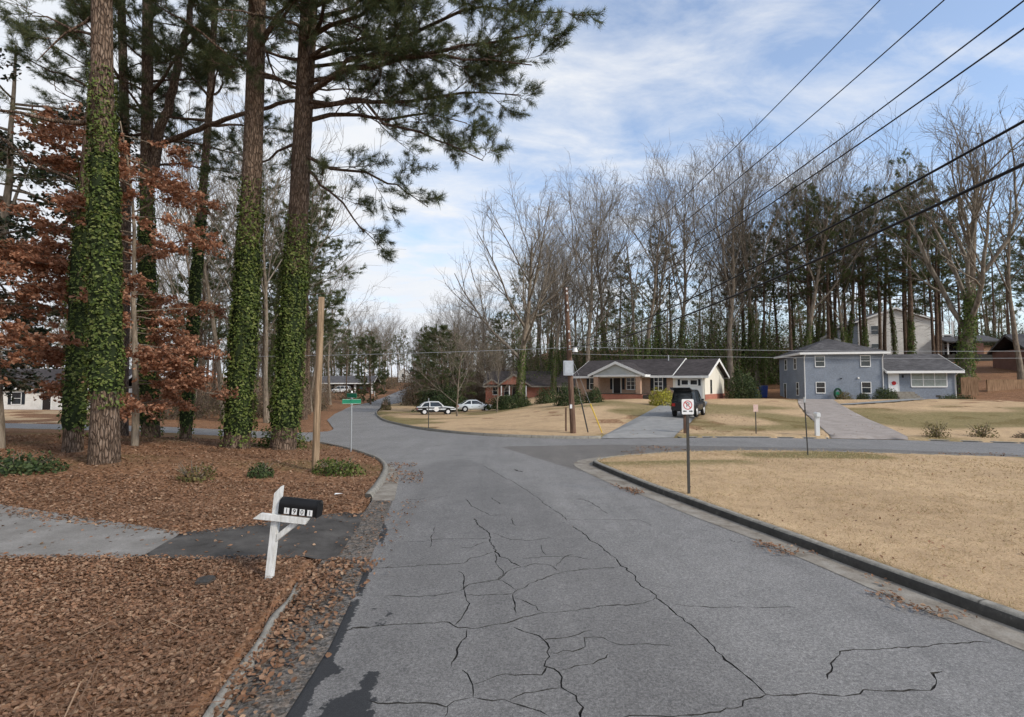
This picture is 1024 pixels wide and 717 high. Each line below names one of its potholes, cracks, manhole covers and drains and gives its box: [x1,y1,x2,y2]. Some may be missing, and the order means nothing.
crack [486,467,989,717]
crack [347,500,669,717]
